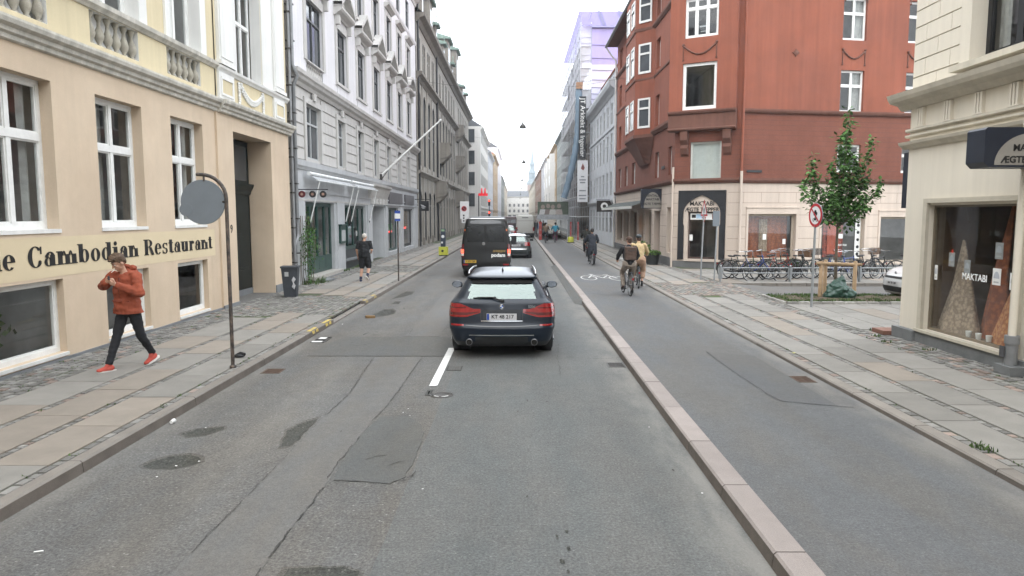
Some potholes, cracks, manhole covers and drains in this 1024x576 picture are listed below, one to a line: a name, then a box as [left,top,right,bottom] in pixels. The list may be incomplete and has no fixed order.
crack [255,359,430,576]
